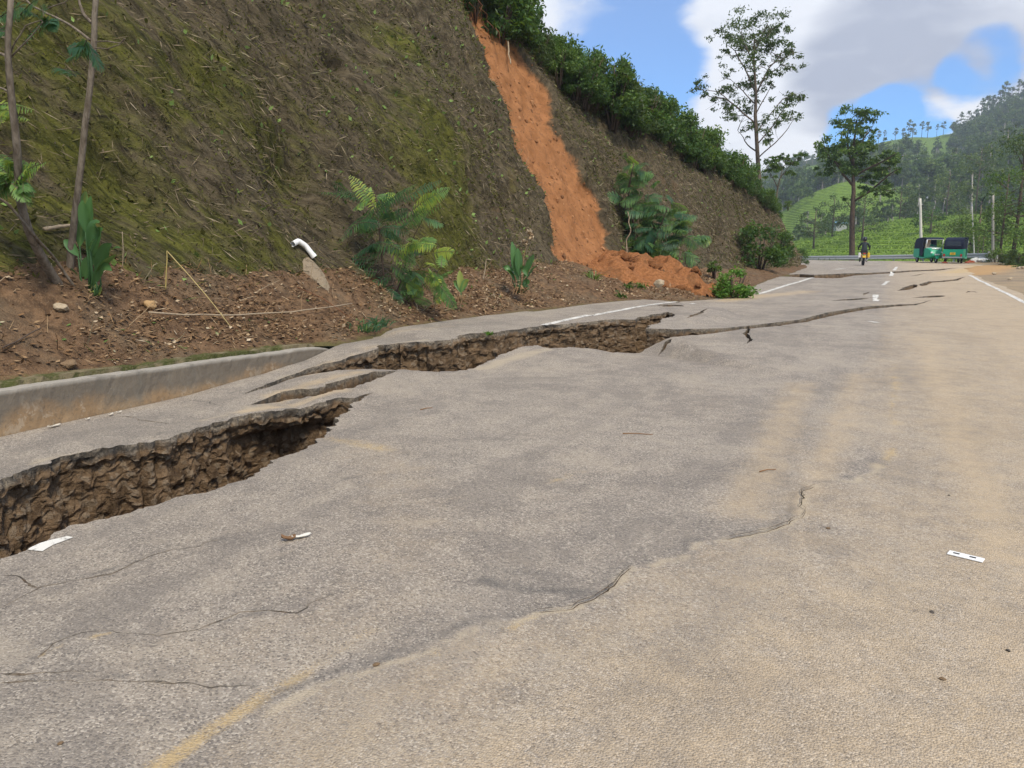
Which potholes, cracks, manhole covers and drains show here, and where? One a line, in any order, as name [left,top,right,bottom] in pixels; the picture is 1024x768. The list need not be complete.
crack [0,268,978,607]
crack [1,593,336,689]
